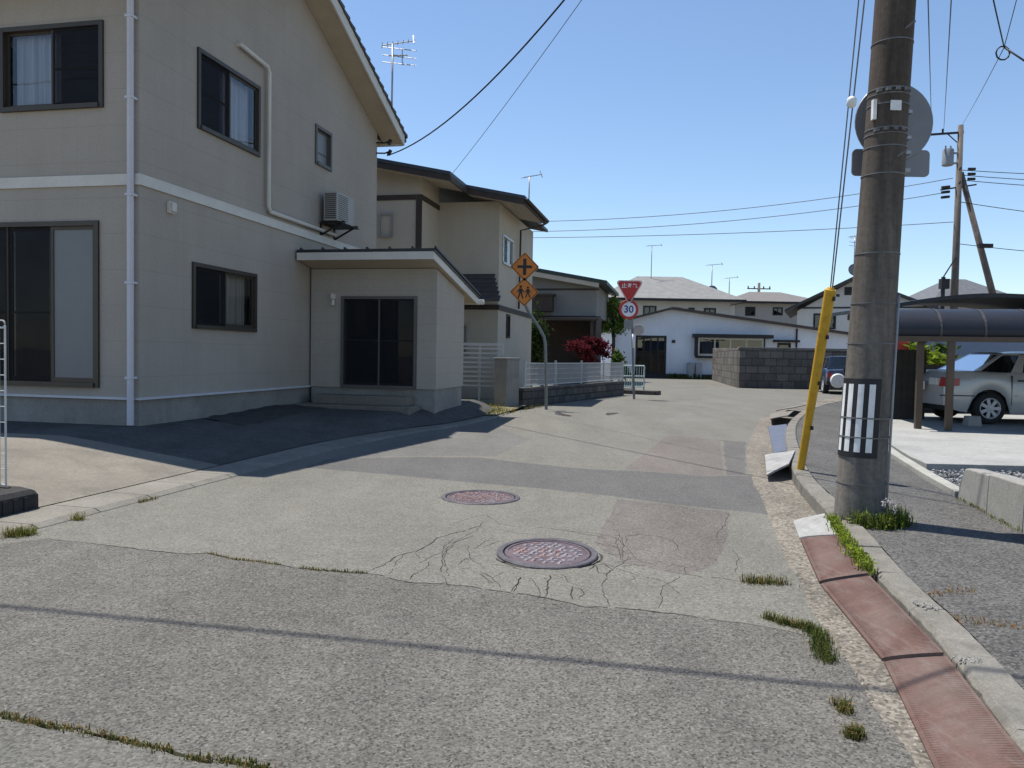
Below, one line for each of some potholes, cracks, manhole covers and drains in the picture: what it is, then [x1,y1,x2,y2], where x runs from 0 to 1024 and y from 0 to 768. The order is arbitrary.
manhole cover [497,538,598,570]
manhole cover [441,490,520,505]
crack [368,513,739,608]
